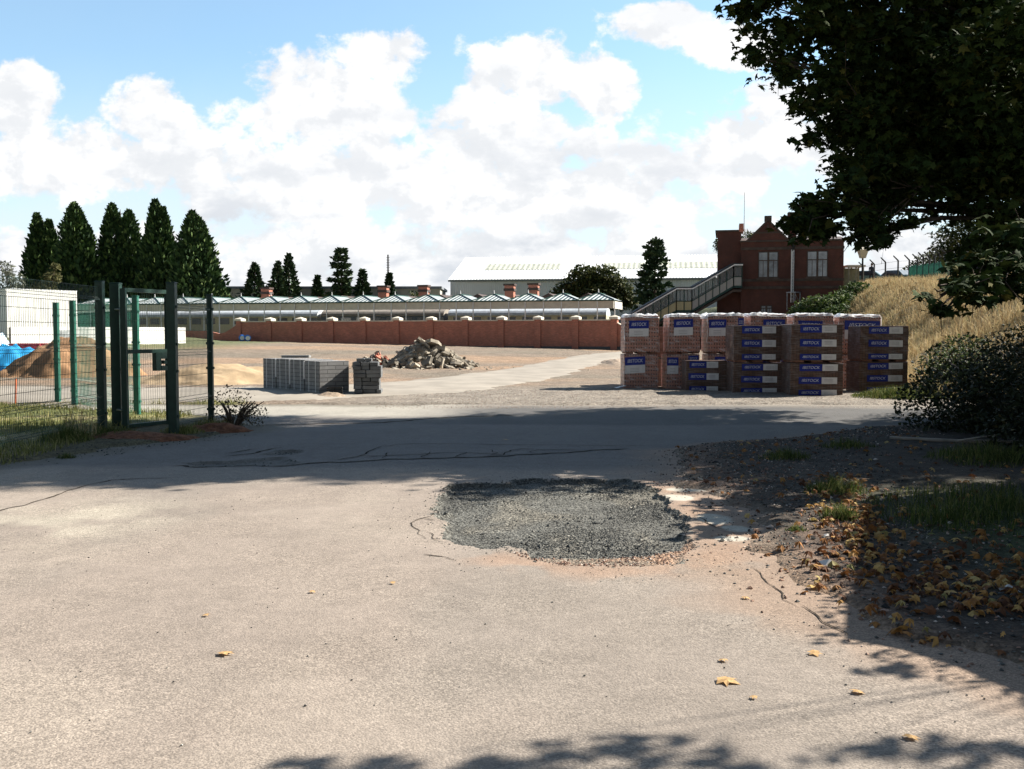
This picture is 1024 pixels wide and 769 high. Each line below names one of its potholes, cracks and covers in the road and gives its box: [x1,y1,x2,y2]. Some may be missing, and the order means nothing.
crack [0,478,141,511]
crack [751,566,847,633]
pothole [390,474,738,582]
crack [411,513,455,560]
crack [178,443,636,467]
